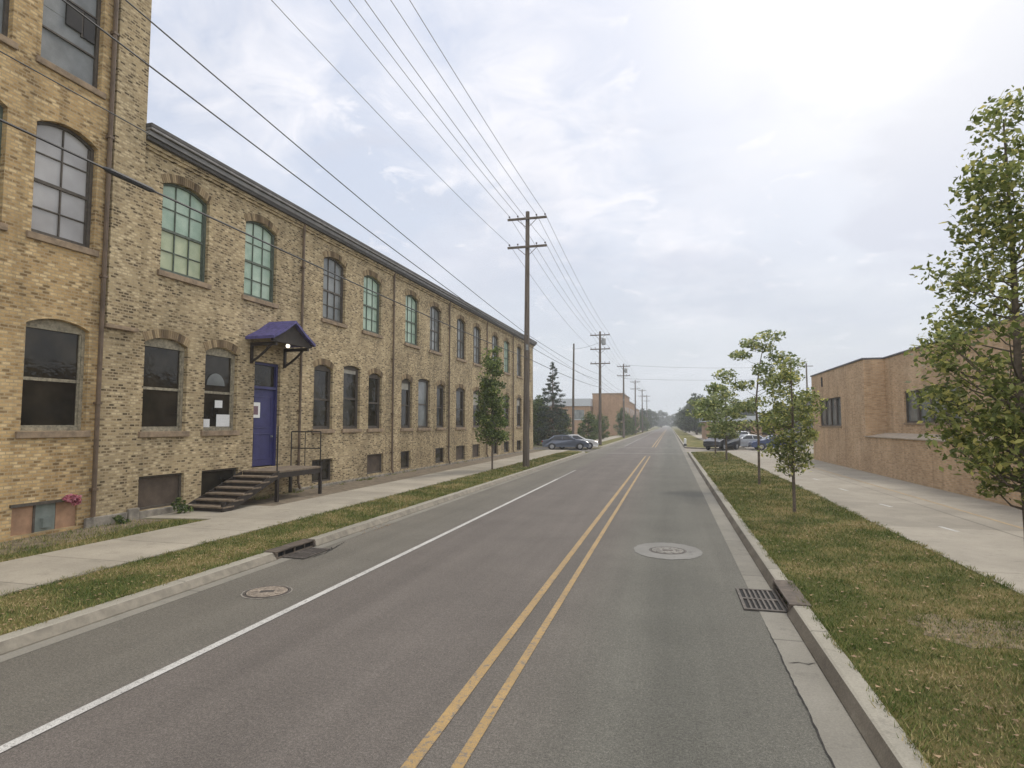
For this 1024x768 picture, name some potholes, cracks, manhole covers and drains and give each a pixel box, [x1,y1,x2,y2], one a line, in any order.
drain grate [263,539,330,560]
manhole cover [240,585,293,599]
crack [766,626,836,768]
drain grate [736,580,812,613]
manhole cover [634,542,703,560]
